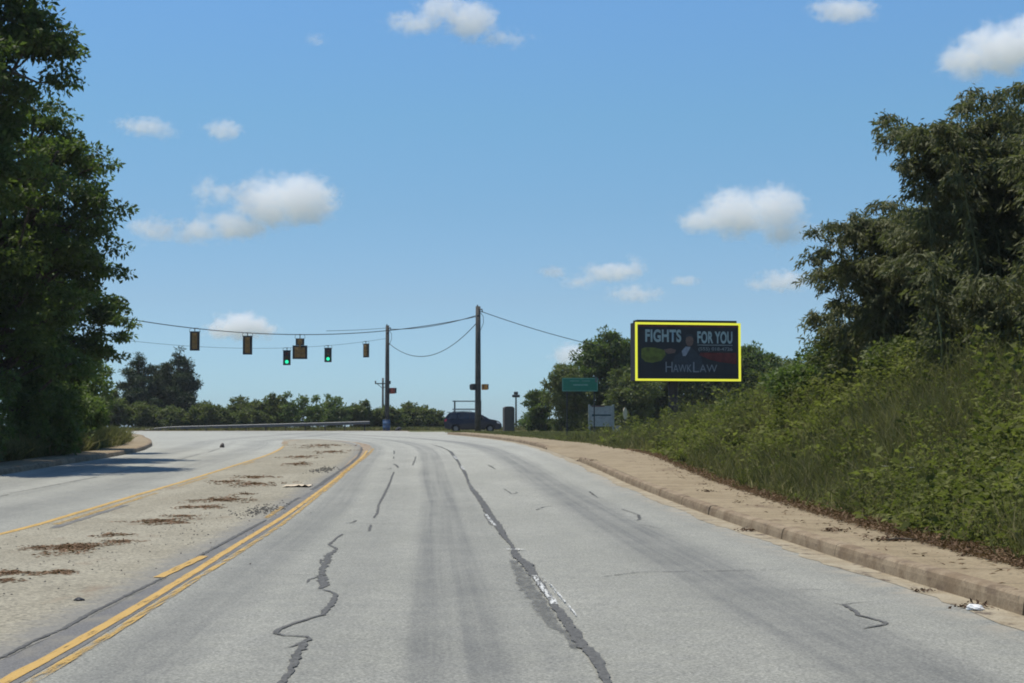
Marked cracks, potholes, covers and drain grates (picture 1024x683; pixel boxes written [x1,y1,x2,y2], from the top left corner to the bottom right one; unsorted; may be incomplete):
crack [273,451,416,683]
crack [837,601,905,628]
